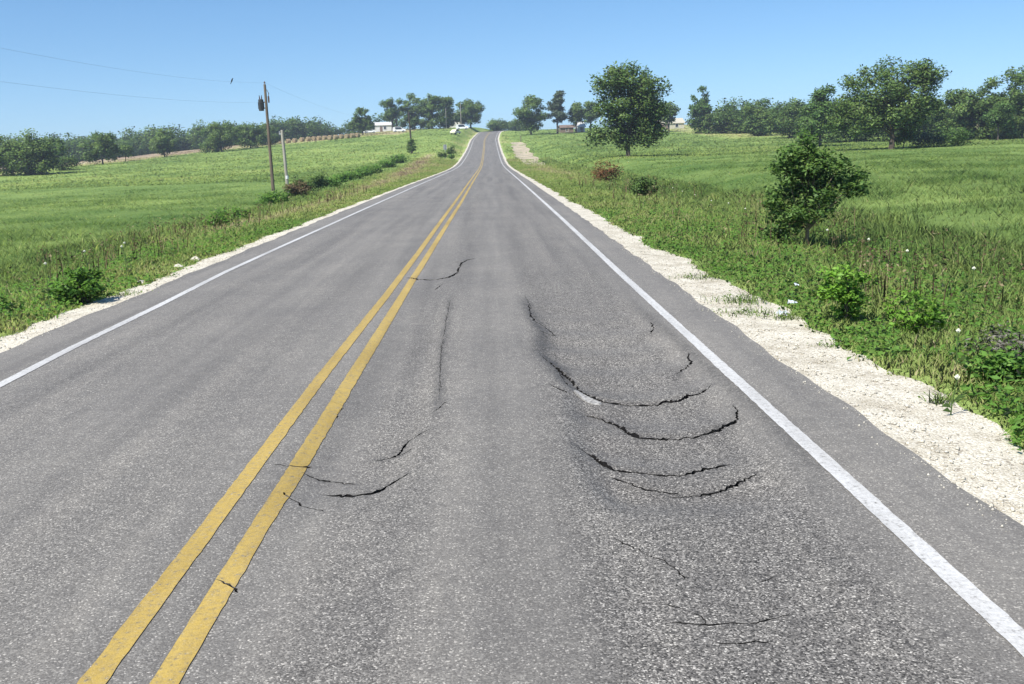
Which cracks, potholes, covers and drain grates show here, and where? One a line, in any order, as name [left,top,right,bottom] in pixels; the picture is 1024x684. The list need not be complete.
crack [658,603,790,644]
crack [616,539,686,579]
crack [543,357,756,498]
crack [277,429,429,511]
crack [413,258,475,410]
